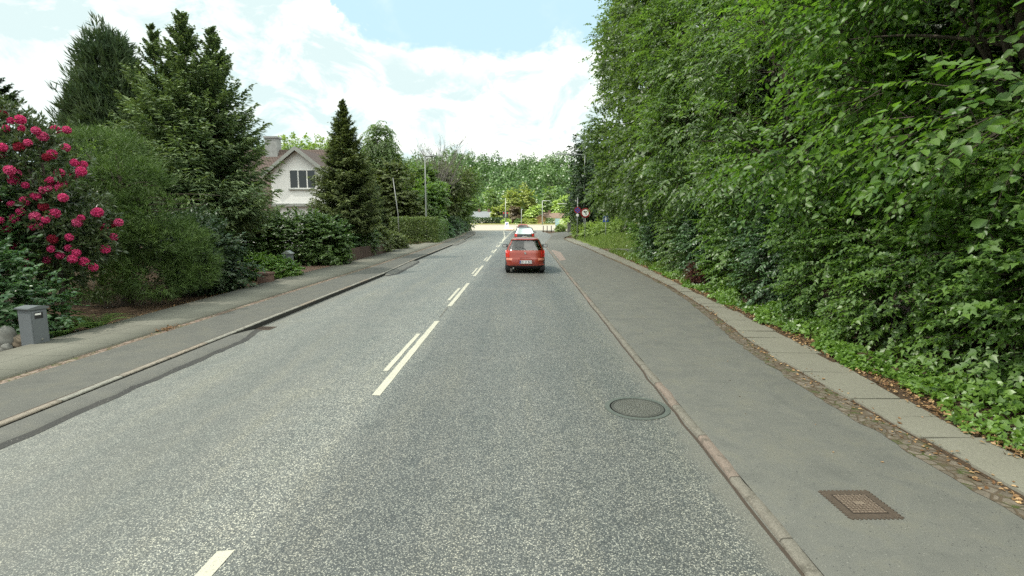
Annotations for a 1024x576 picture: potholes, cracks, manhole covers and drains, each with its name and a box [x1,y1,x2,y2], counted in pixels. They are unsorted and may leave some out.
manhole cover [605,397,670,420]
utility cover [818,490,904,520]
